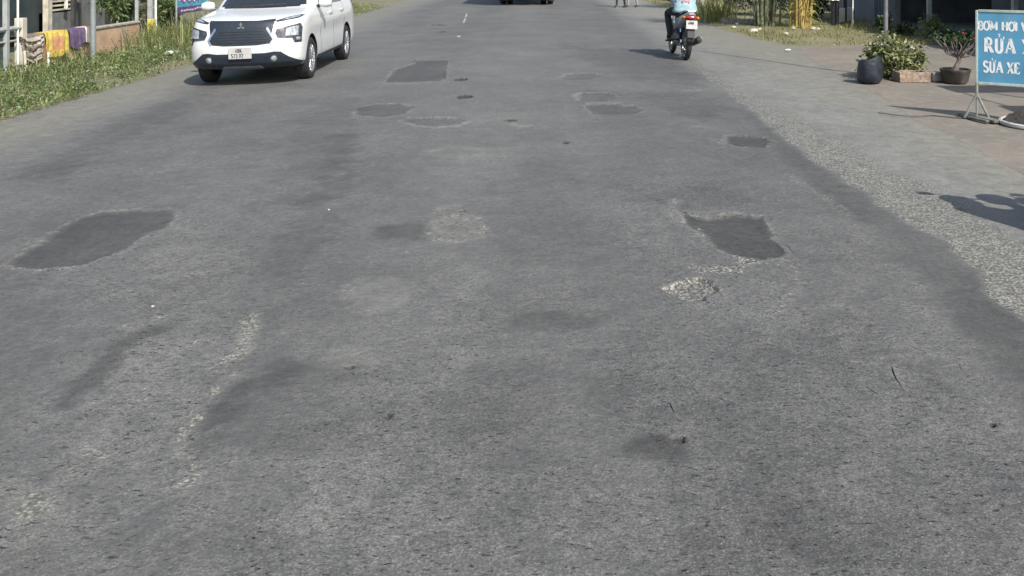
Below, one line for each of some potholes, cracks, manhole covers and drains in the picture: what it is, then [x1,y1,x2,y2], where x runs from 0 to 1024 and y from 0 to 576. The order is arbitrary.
pothole [418,213,493,243]
pothole [649,273,731,306]
pothole [450,208,475,217]
